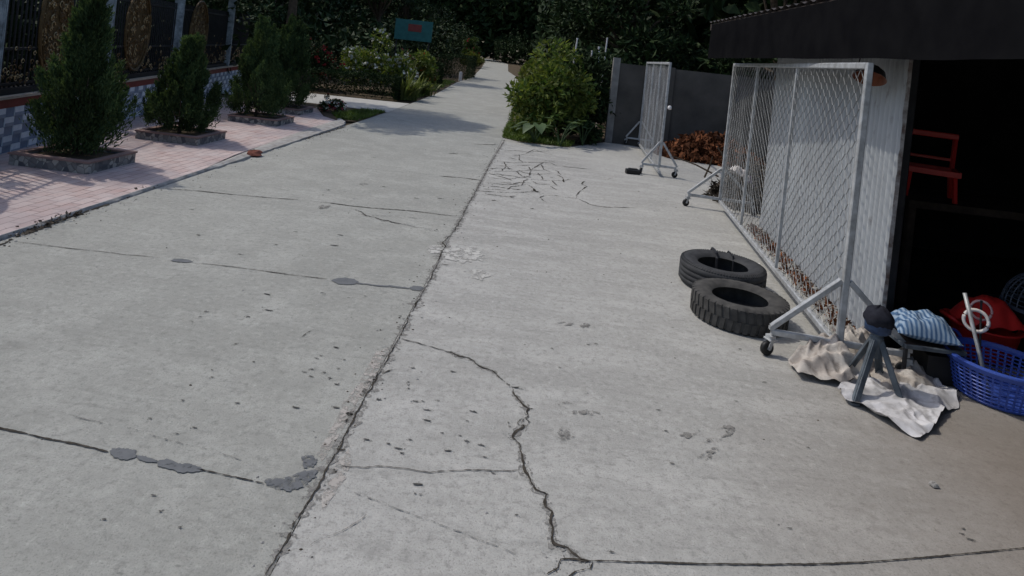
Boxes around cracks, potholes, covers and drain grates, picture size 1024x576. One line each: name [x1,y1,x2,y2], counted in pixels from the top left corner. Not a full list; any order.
crack [265,139,630,576]
